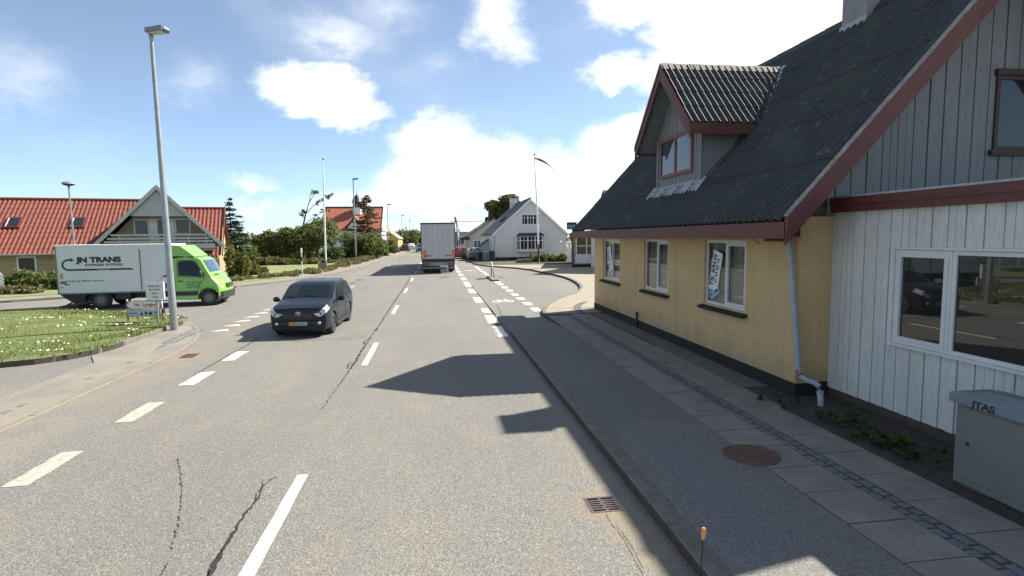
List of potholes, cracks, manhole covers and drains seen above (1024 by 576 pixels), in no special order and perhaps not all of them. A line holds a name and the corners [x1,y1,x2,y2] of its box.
crack [159,458,183,576]
drain grate [583,496,623,513]
crack [294,277,410,409]
crack [207,476,277,576]
crack [606,514,644,576]
manhole cover [722,444,781,467]
